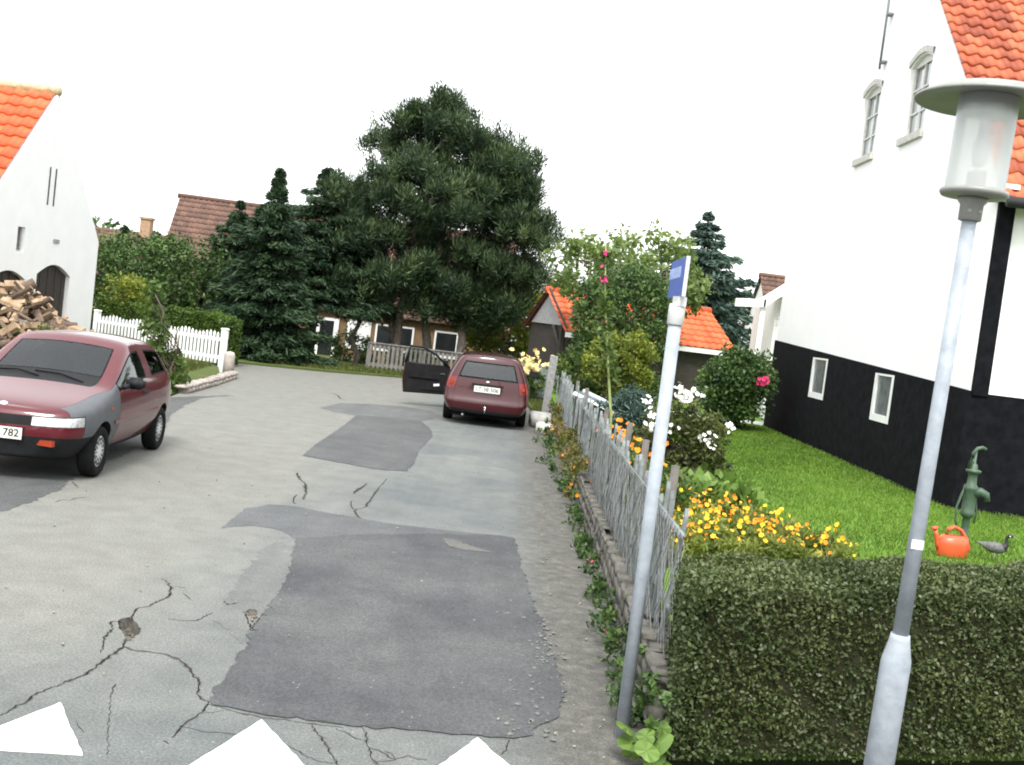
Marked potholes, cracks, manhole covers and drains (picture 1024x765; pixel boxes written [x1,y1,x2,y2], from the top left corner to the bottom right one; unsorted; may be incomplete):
crack [0,578,427,765]
pothole [118,617,142,641]
crack [336,479,386,518]
pothole [246,609,258,623]
crack [293,473,308,504]
